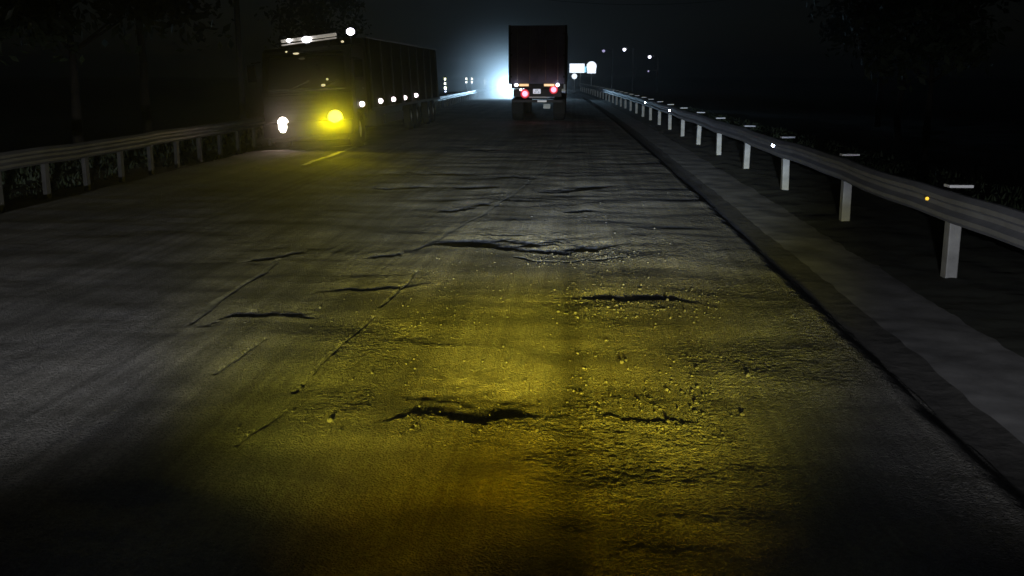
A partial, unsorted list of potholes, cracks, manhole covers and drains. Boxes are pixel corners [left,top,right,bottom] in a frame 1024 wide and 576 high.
pothole [400,221,634,256]
crack [235,270,418,447]
pothole [555,288,720,307]
pothole [355,347,566,434]
crack [191,259,281,375]
